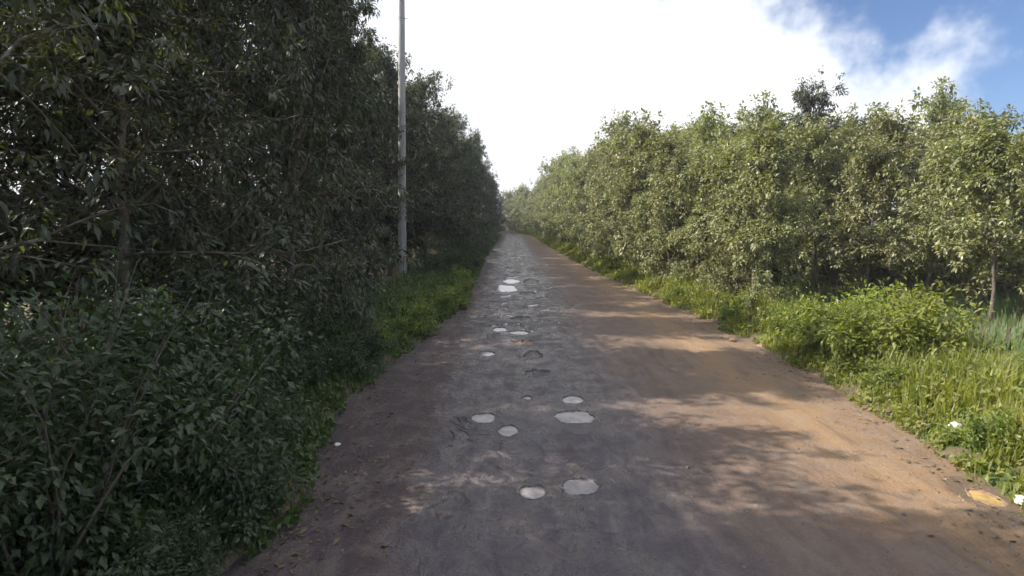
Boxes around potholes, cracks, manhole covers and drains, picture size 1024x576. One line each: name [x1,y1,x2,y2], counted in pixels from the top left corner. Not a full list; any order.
pothole [523,368,552,379]
pothole [559,477,601,496]
pothole [496,424,520,437]
pothole [518,483,547,500]
pothole [521,350,544,360]
pothole [561,394,586,404]
crack [450,417,488,442]
pothole [550,410,599,424]
pothole [470,412,497,424]
